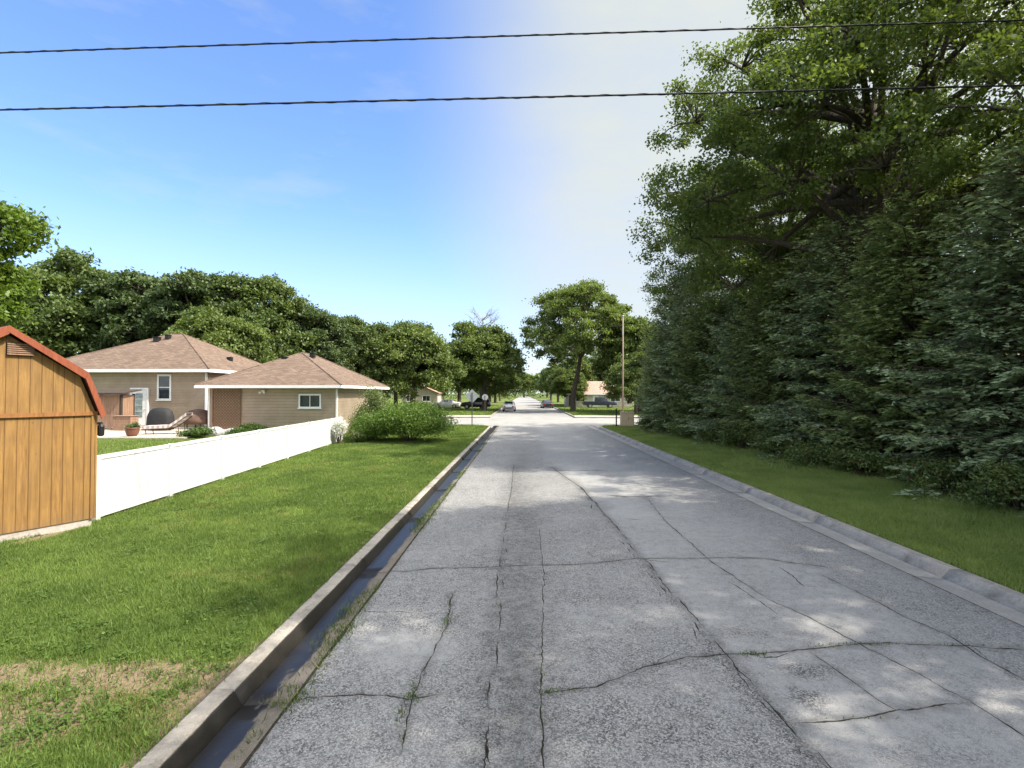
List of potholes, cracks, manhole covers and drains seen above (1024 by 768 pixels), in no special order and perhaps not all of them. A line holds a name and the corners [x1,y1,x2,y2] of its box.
crack [297,596,453,749]
crack [390,495,1024,768]
